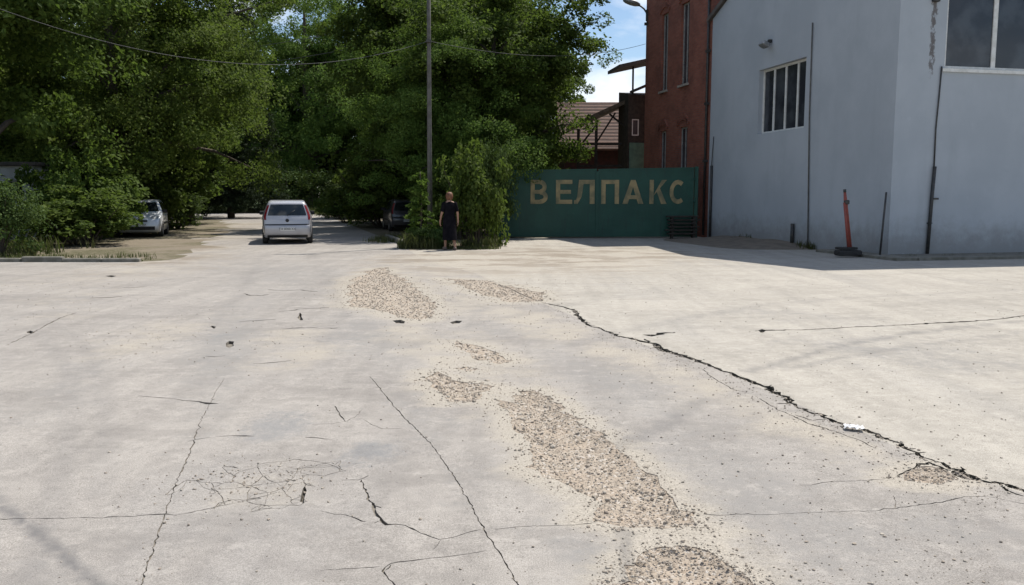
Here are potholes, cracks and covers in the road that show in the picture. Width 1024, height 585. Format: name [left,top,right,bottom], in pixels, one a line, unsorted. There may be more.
crack [546,303,1024,516]
pothole [446,278,555,302]
crack [321,475,483,585]
pothole [419,371,502,403]
pothole [455,342,513,364]
pothole [346,267,440,321]
crack [167,459,345,515]
pothole [621,546,768,585]
pothole [903,466,958,485]
pothole [494,389,698,535]
